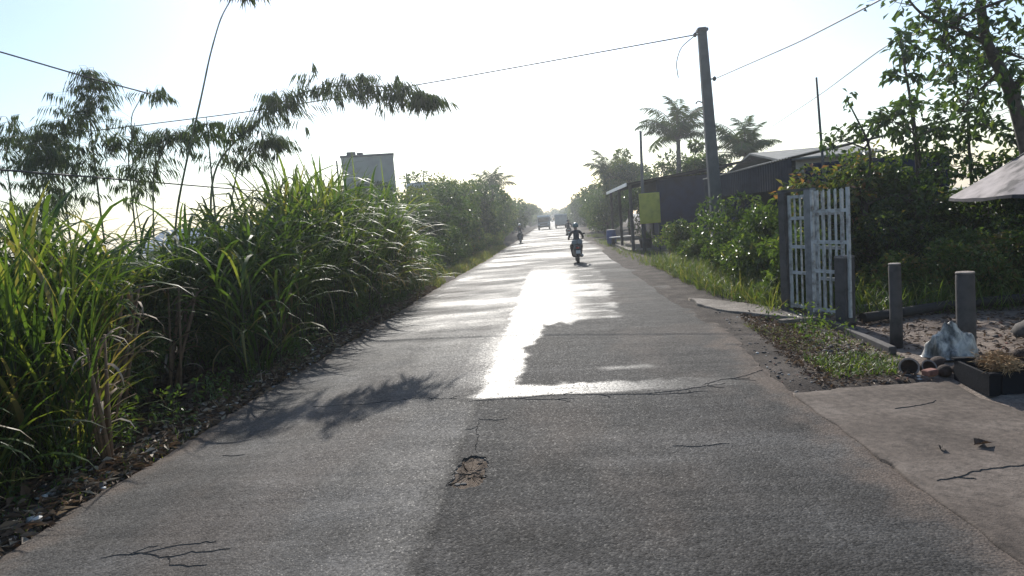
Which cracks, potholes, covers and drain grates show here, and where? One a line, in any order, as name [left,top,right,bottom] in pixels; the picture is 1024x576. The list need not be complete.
pothole [445,455,490,489]
crack [937,464,1024,481]
crack [474,370,762,401]
crack [101,541,230,567]
